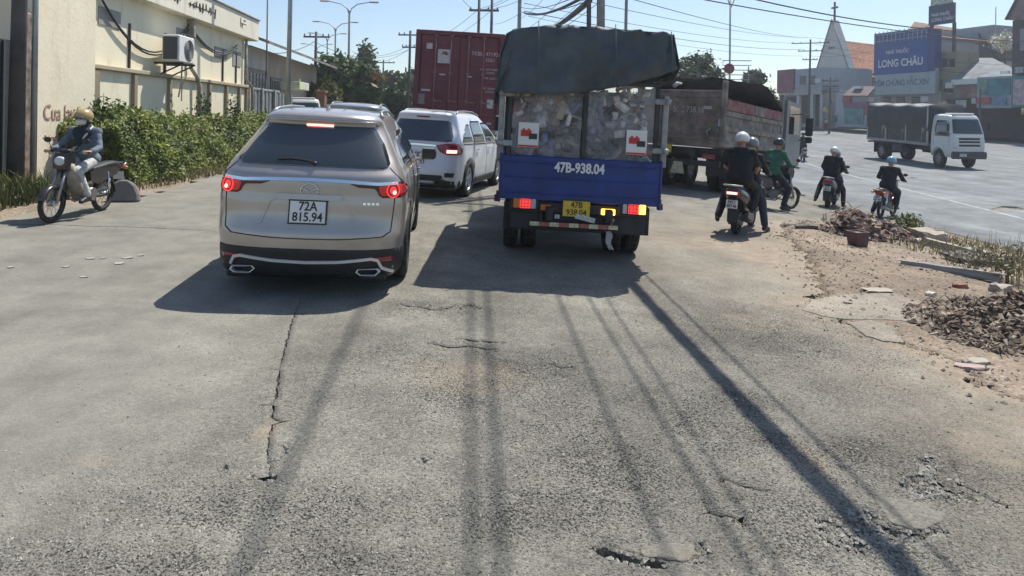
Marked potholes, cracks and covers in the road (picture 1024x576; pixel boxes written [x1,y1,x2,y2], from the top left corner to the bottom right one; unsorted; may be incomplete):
pothole [891,452,999,507]
pothole [841,505,955,554]
crack [252,300,307,479]
pothole [803,513,879,561]
crack [691,475,772,530]
crack [428,337,501,352]
crack [396,303,481,313]
crack [545,364,572,372]
pothole [580,543,678,573]
